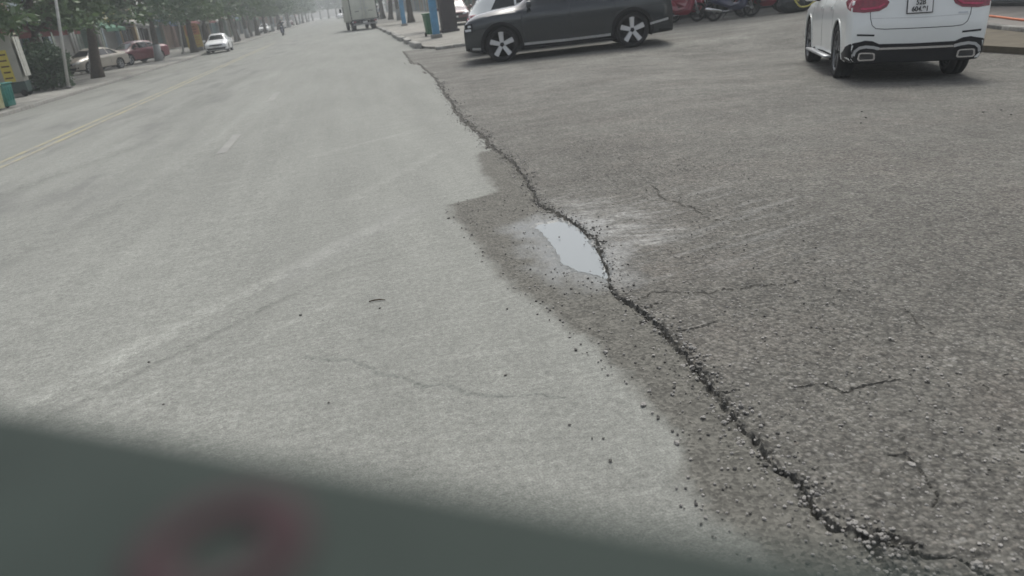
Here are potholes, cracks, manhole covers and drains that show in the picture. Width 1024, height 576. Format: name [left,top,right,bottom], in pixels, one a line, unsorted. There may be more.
crack [402,51,992,576]
crack [303,355,566,400]
